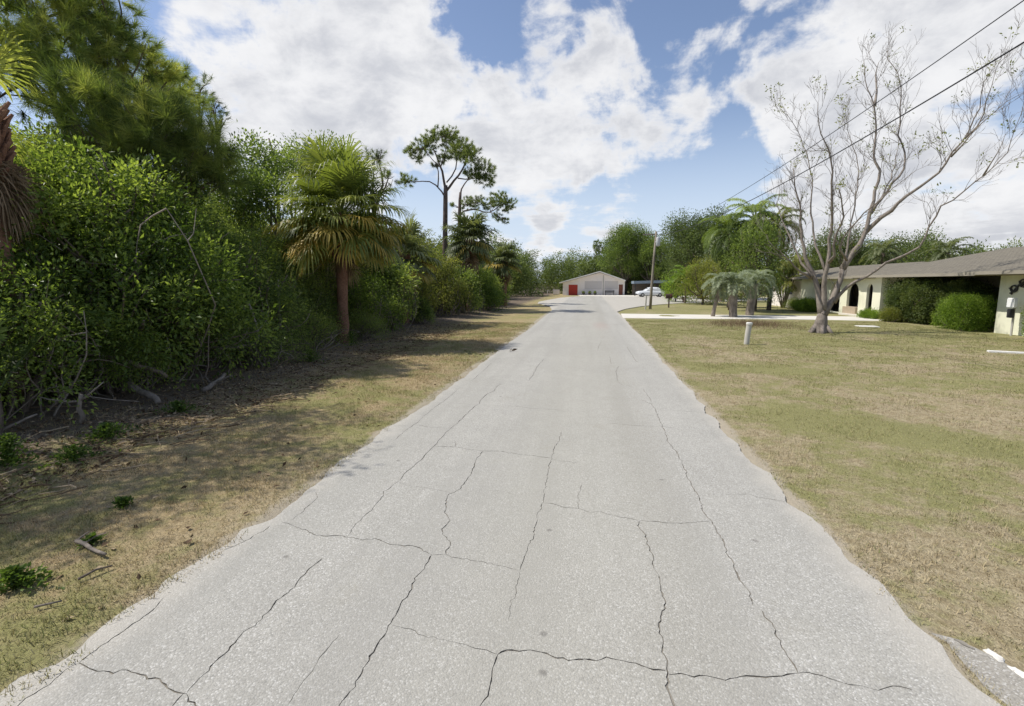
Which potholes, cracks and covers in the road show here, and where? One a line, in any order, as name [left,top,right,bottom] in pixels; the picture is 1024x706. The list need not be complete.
crack [18,560,321,706]
crack [288,387,912,706]
